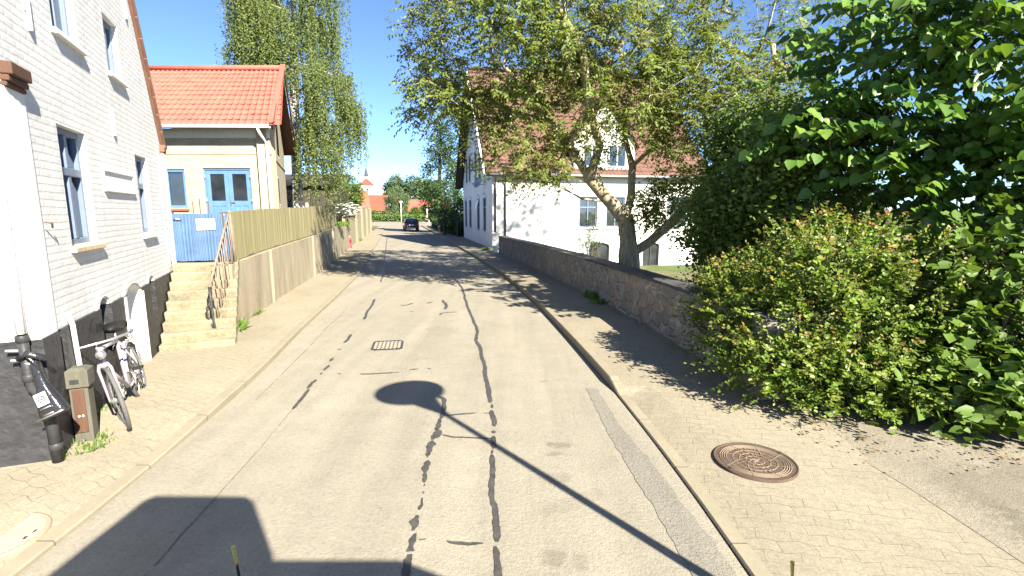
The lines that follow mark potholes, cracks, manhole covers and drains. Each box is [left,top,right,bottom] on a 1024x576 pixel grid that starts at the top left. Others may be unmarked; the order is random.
manhole cover [0,512,52,558]
drain grate [371,340,404,351]
manhole cover [713,442,799,483]
